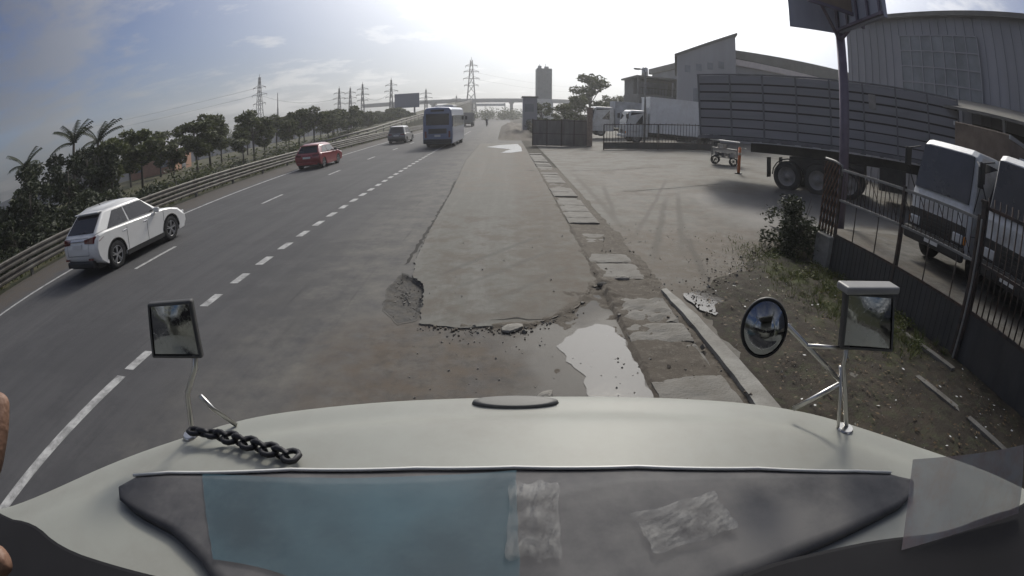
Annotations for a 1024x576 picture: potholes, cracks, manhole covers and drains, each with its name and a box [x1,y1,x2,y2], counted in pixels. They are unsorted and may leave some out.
pothole [382,273,424,325]
crack [406,181,456,264]
